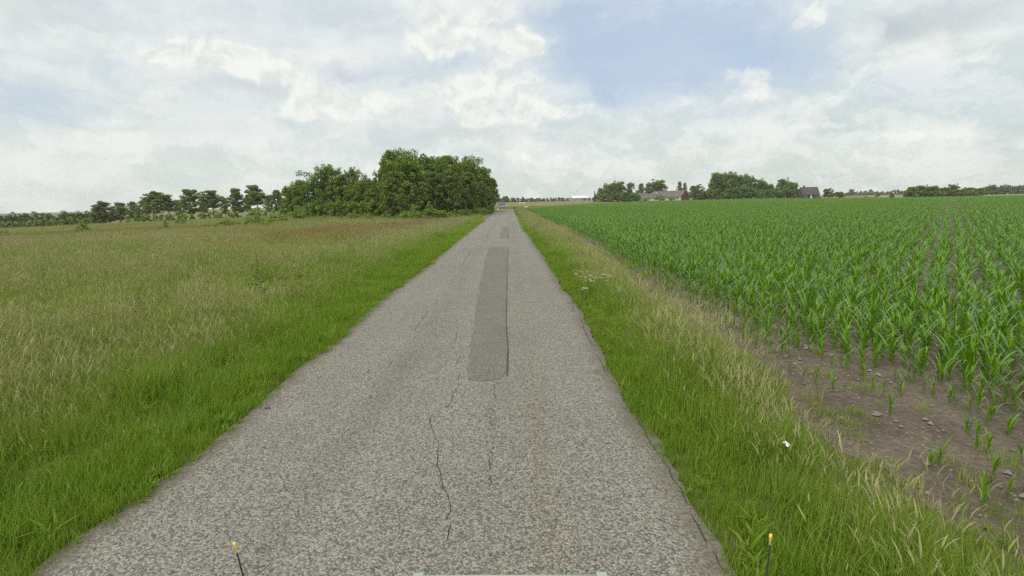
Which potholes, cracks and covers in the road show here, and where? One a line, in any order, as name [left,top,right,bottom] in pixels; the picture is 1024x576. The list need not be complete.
crack [475,383,497,558]
crack [429,334,460,542]
